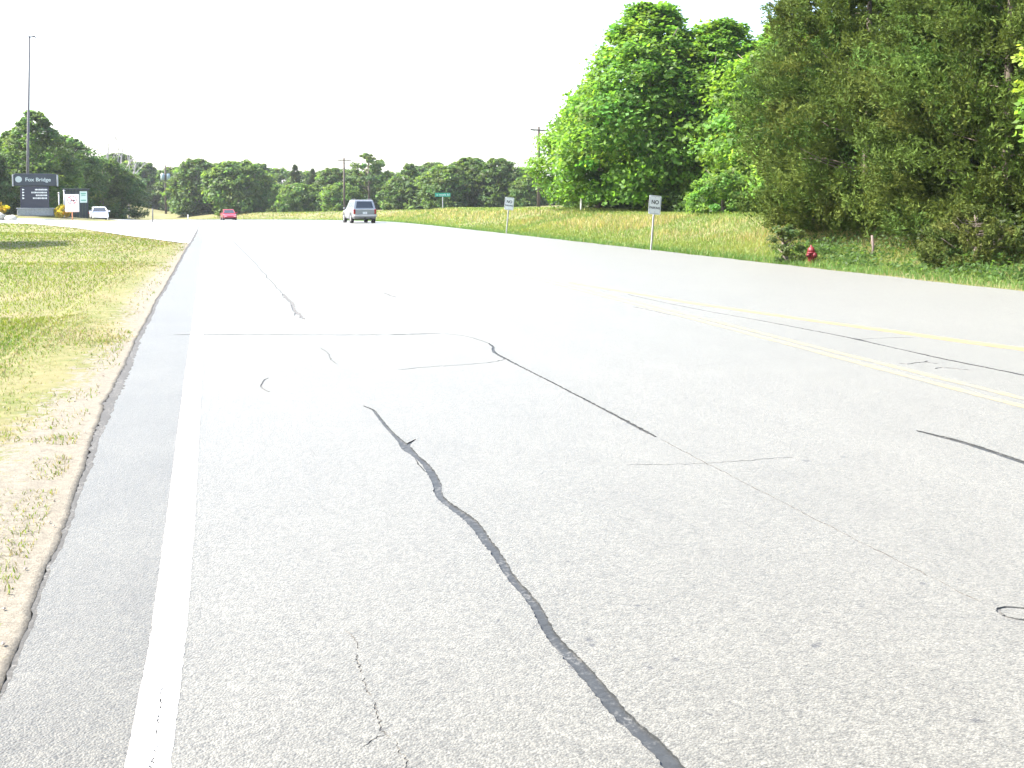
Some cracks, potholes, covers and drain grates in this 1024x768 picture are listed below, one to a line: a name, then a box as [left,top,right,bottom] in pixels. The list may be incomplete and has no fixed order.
crack [916,430,1024,464]
crack [996,606,1024,621]
crack [0,226,979,768]
